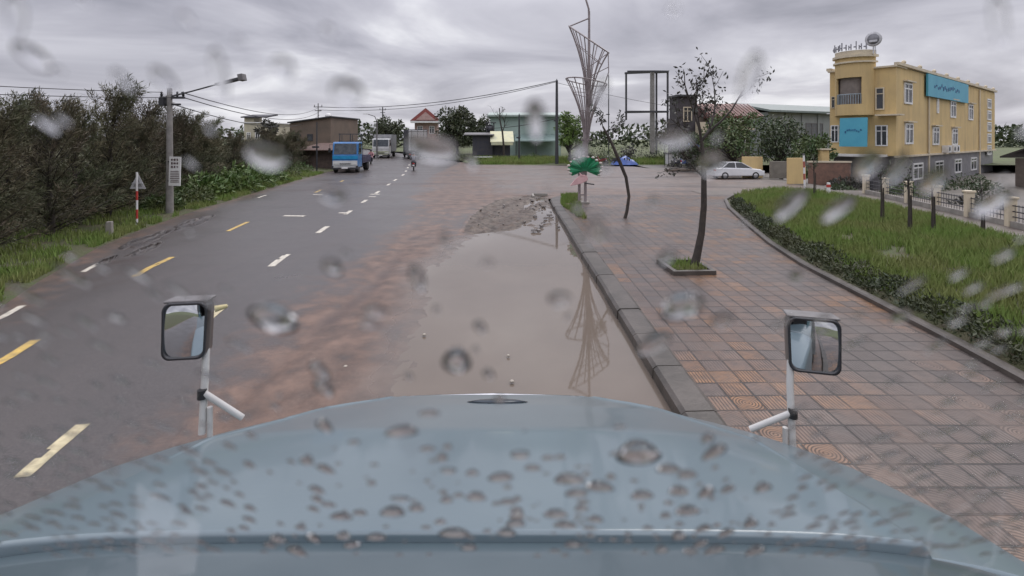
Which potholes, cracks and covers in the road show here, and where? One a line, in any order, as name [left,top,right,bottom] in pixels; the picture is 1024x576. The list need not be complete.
pothole [464,195,560,235]
